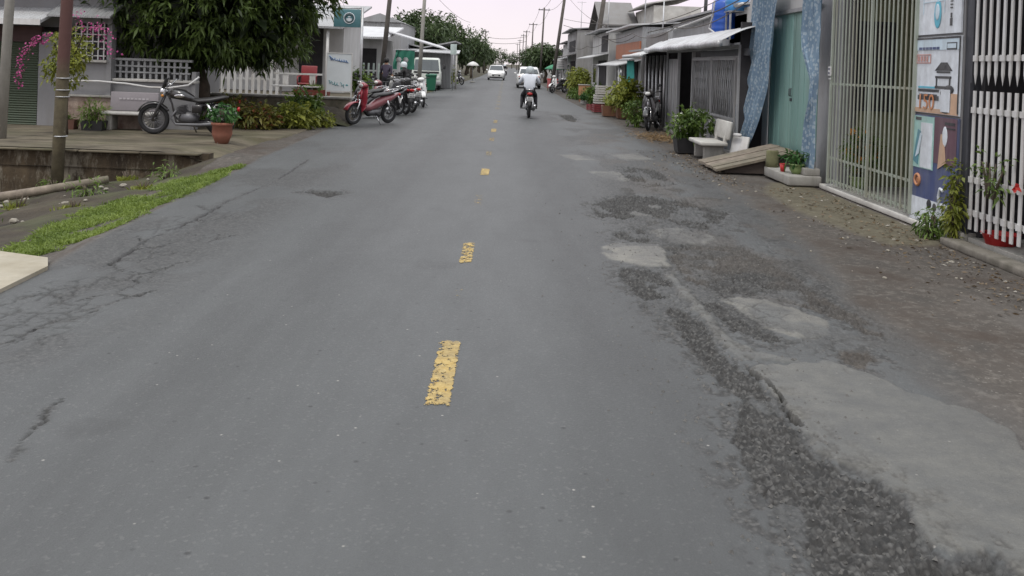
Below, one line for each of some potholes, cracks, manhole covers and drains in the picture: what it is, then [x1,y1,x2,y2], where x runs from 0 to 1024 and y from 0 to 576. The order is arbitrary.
crack [0,167,298,338]
pothole [617,267,942,576]
pothole [305,190,343,198]
crack [743,368,805,427]
